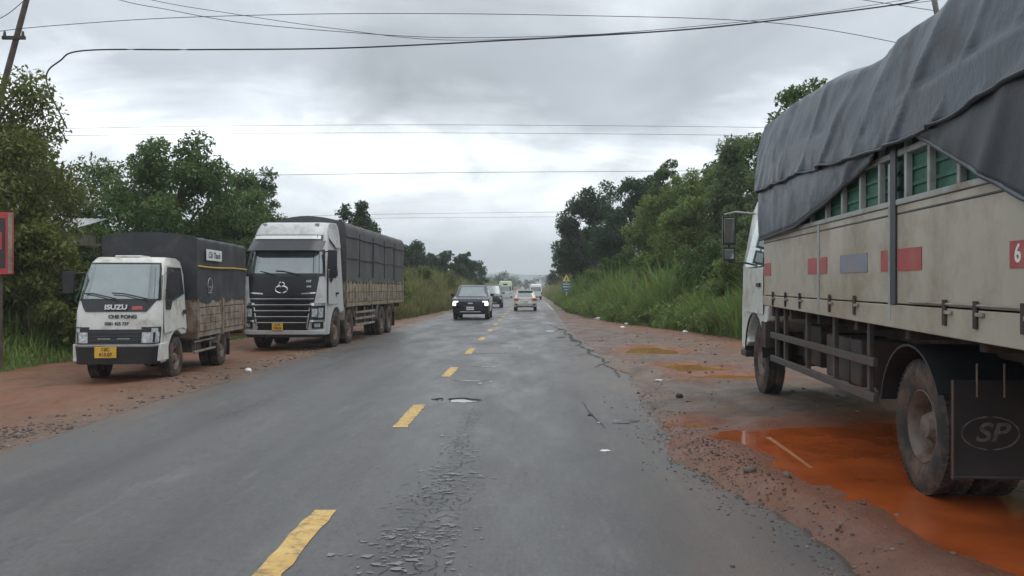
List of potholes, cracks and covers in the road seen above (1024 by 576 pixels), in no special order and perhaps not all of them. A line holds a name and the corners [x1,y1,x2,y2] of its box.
crack [547,324,629,377]
